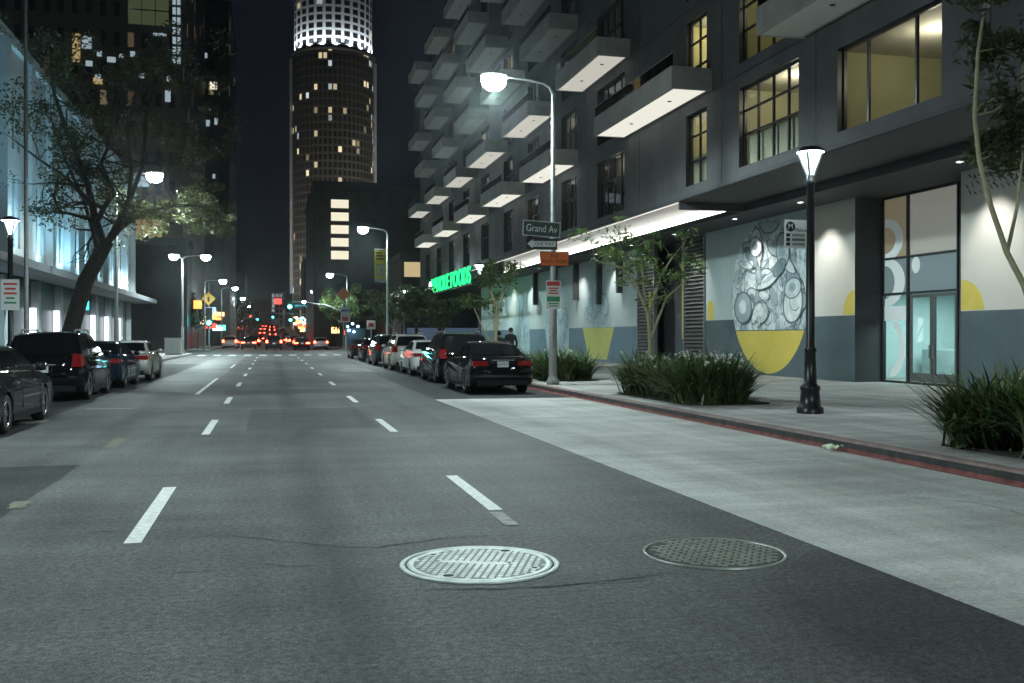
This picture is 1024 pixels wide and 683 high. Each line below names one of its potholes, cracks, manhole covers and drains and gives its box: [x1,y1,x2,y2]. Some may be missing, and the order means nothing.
crack [418,571,681,590]
crack [192,534,504,548]
manhole cover [400,546,560,584]
manhole cover [643,537,787,570]
